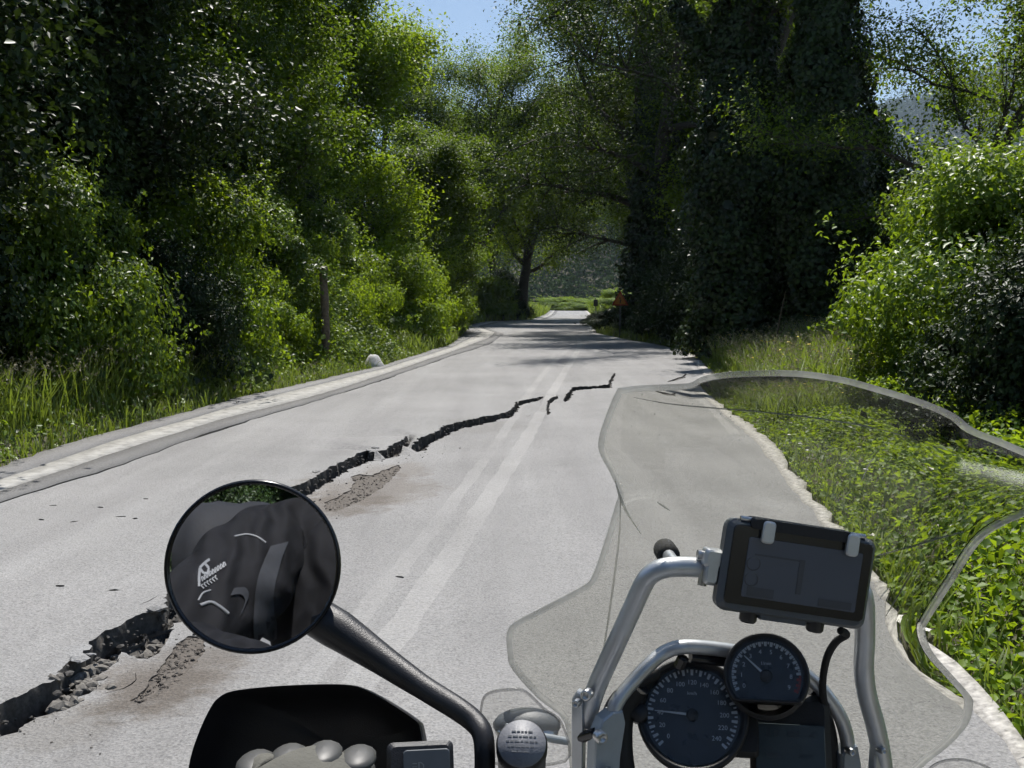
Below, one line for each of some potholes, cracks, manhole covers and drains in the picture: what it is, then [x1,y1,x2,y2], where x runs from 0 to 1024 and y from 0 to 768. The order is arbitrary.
crack [0,373,615,737]
